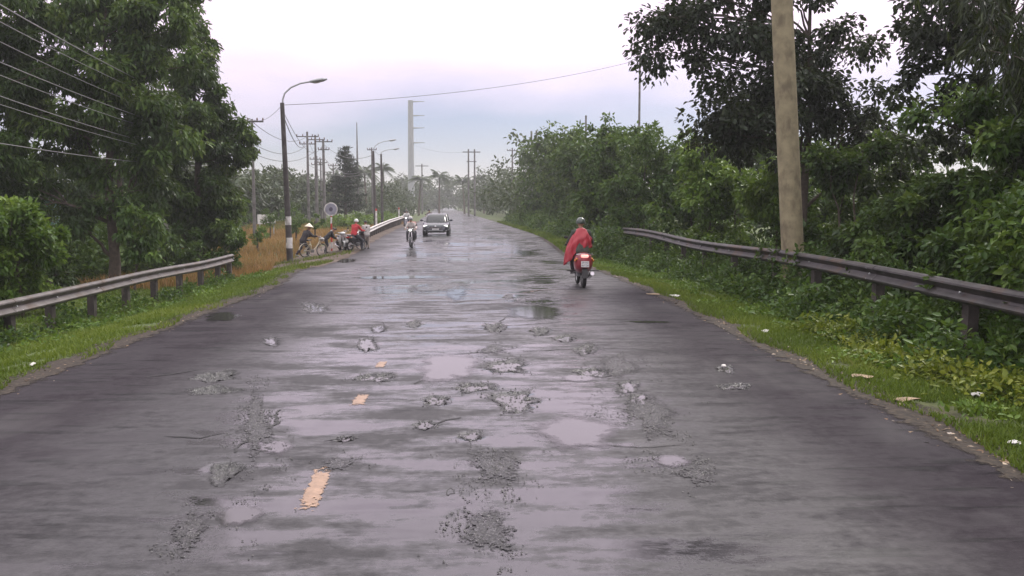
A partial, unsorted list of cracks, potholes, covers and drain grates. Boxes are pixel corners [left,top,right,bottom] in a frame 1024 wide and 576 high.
pothole [628,393,649,406]
pothole [210,458,243,487]
pothole [444,380,499,394]
pothole [357,337,377,353]
pothole [714,364,735,376]
pothole [616,379,640,396]
pothole [569,365,619,379]
pothole [188,369,237,383]
pothole [480,355,532,374]
pothole [342,372,398,384]
pothole [458,429,483,441]
pothole [477,387,550,417]
